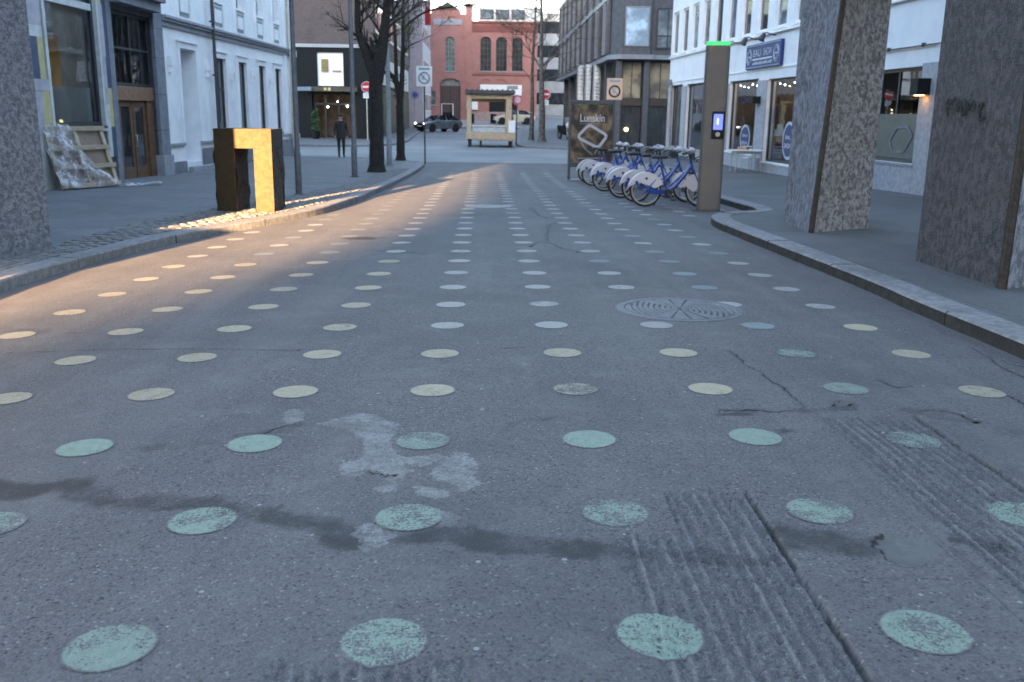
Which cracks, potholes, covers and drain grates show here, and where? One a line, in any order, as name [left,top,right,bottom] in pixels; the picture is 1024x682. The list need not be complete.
crack [965,347,1024,408]
crack [716,351,855,415]
crack [521,208,580,253]
crack [258,423,295,435]
manhole cover [615,298,746,322]
